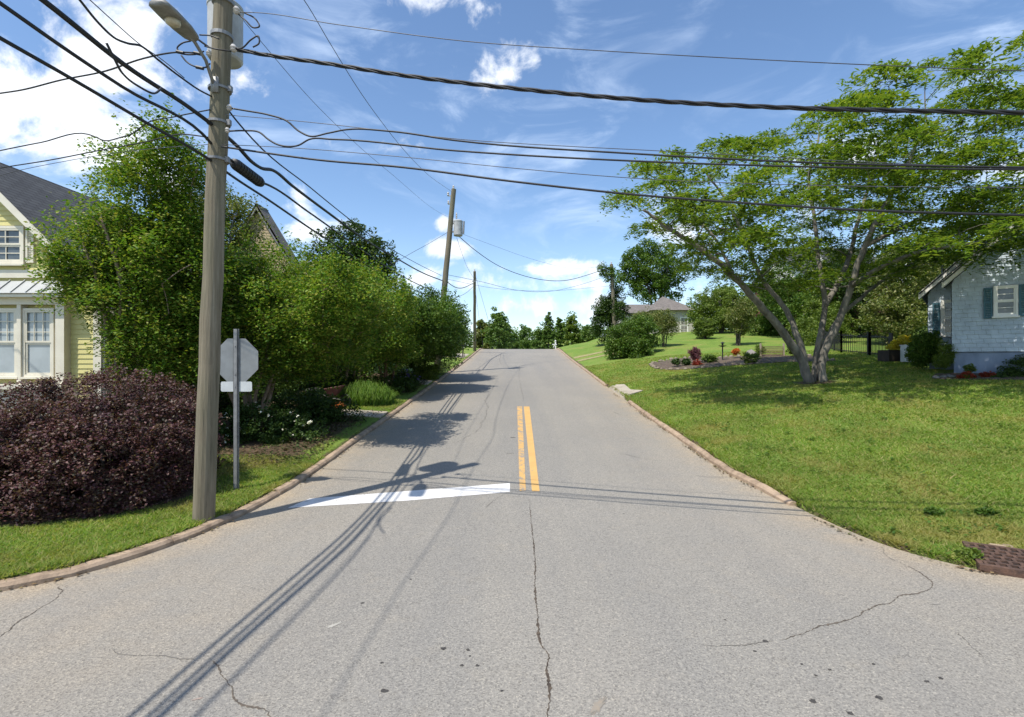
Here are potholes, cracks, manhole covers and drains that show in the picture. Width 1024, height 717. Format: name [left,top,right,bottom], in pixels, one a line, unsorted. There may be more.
crack [213,661,271,717]
crack [113,650,195,660]
drain grate [962,541,1024,579]
crack [783,566,939,640]
crack [529,501,552,717]
